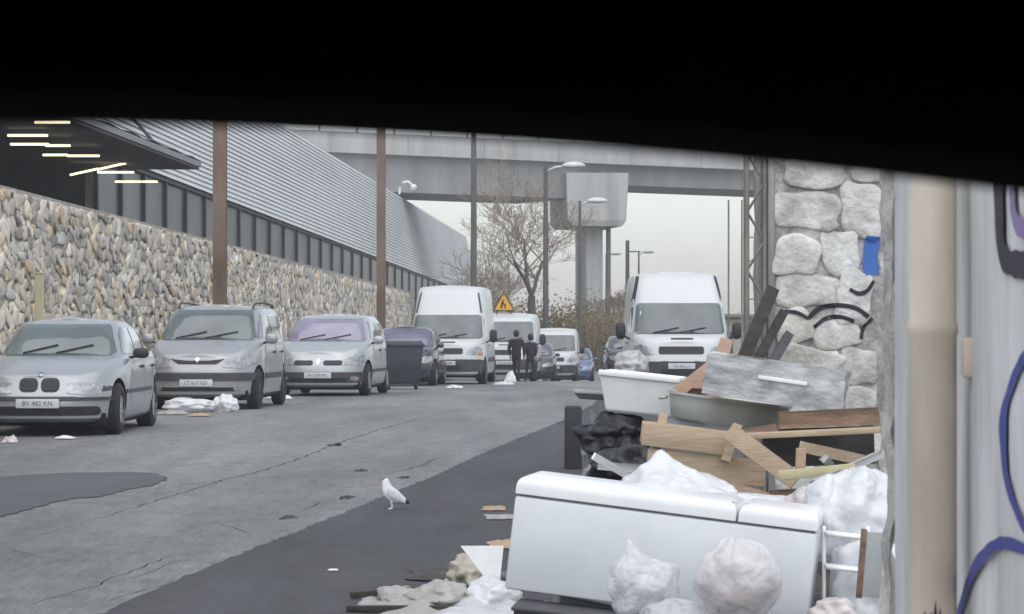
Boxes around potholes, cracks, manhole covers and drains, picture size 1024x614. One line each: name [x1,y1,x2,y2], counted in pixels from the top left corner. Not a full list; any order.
crack [31,409,460,537]
crack [2,546,209,605]
